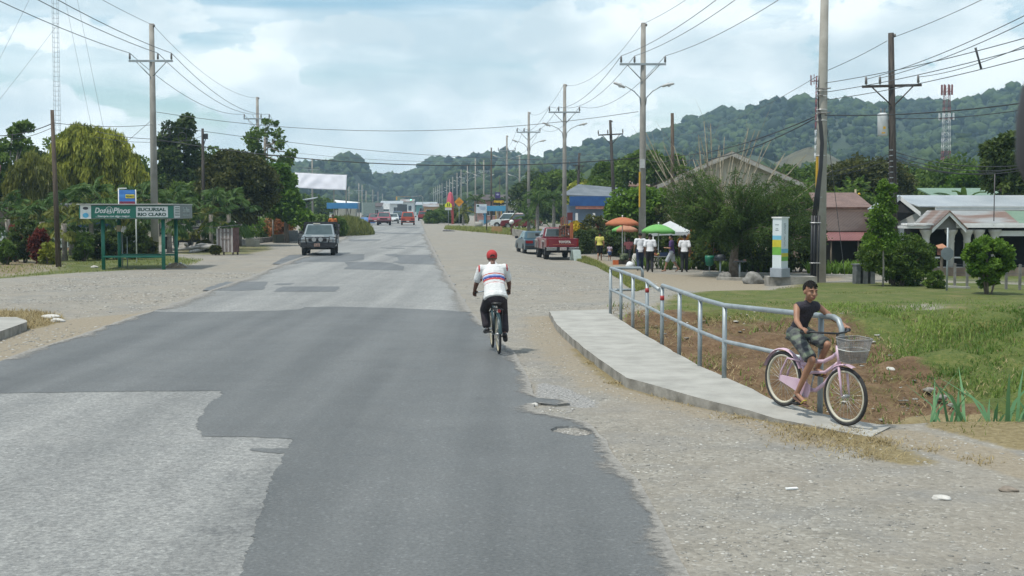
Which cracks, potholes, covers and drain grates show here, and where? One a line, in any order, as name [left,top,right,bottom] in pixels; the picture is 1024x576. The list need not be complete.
pothole [551,426,594,436]
